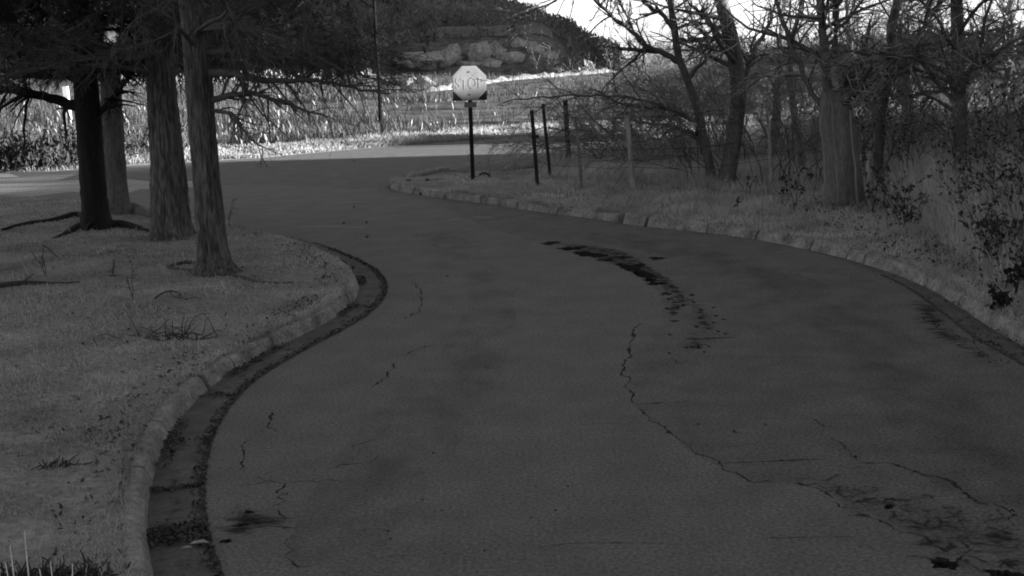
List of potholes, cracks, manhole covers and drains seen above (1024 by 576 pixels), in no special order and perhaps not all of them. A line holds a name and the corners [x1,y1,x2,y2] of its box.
crack [372,344,434,387]
crack [217,412,383,567]
crack [583,323,1014,567]
